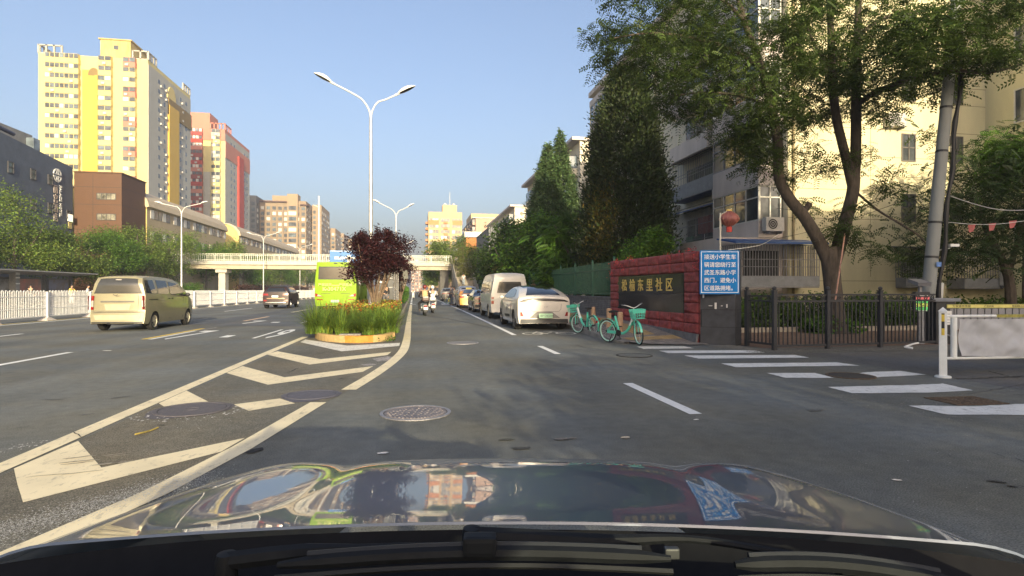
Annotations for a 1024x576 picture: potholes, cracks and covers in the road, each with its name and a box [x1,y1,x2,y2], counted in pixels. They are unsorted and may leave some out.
manhole cover [281,389,342,402]
manhole cover [380,405,451,421]
manhole cover [144,402,235,419]
